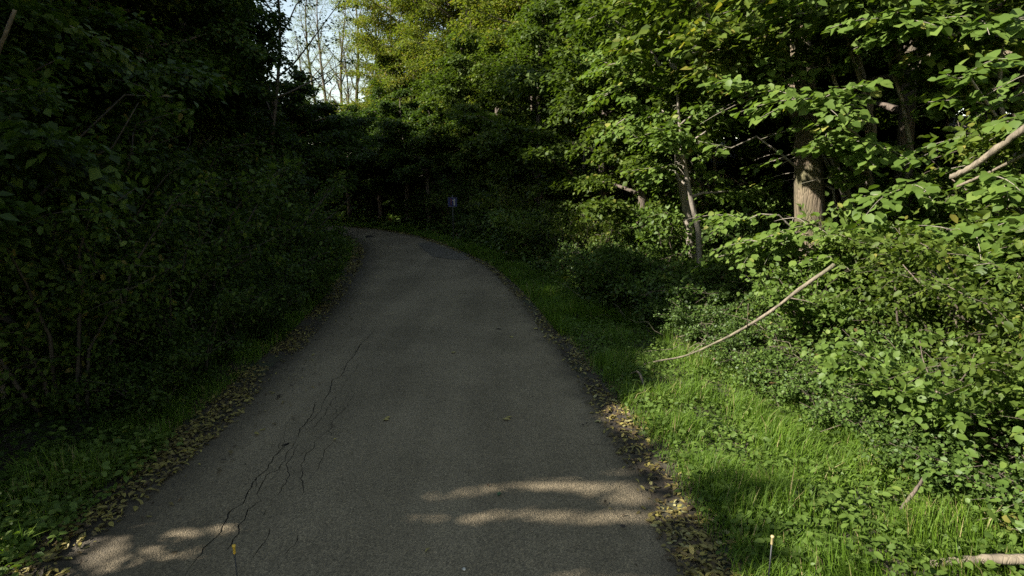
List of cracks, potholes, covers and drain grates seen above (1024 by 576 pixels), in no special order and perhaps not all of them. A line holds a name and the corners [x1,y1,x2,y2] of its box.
crack [185,332,378,575]
